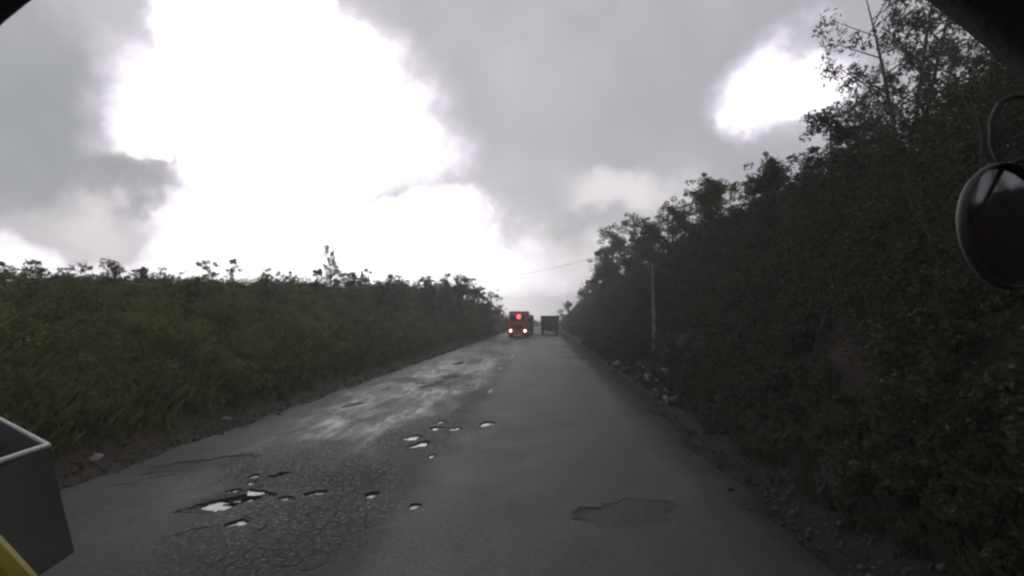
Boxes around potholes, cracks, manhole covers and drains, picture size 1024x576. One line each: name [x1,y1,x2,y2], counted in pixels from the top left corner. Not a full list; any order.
pothole [173,494,252,514]
pothole [223,518,250,527]
pothole [223,496,262,504]
pothole [244,488,277,498]
crack [162,453,402,576]
